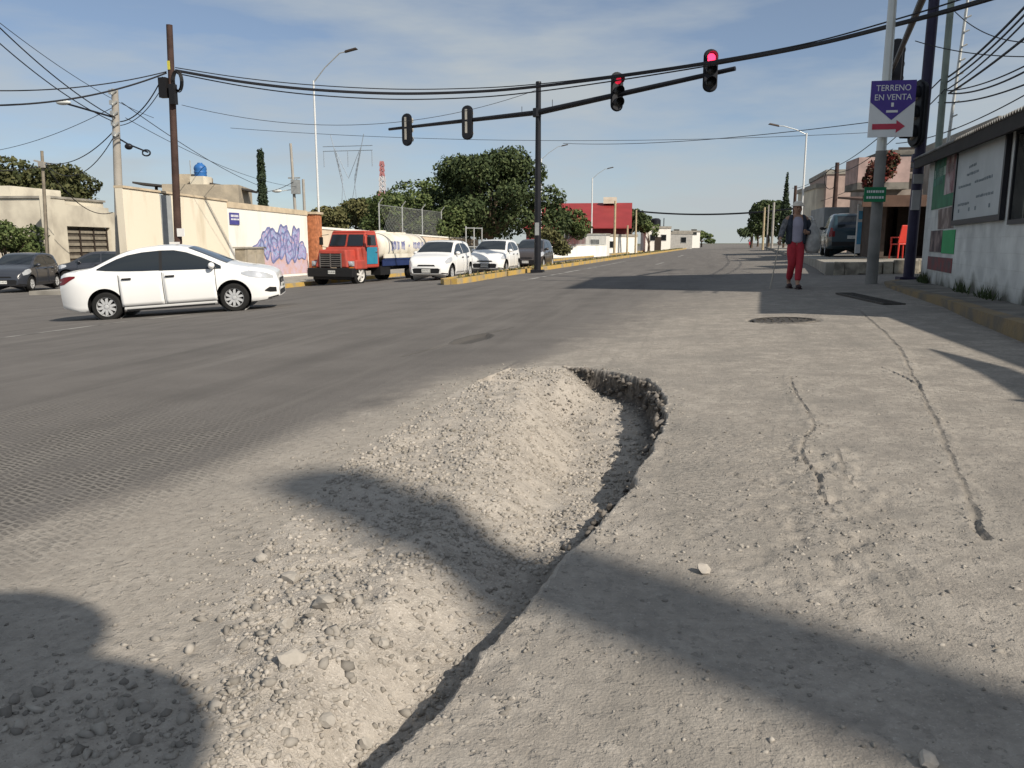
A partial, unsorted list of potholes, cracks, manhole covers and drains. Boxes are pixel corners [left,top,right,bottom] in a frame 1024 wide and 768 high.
crack [733,309,994,540]
pothole [198,365,669,768]
drain grate [836,292,906,305]
